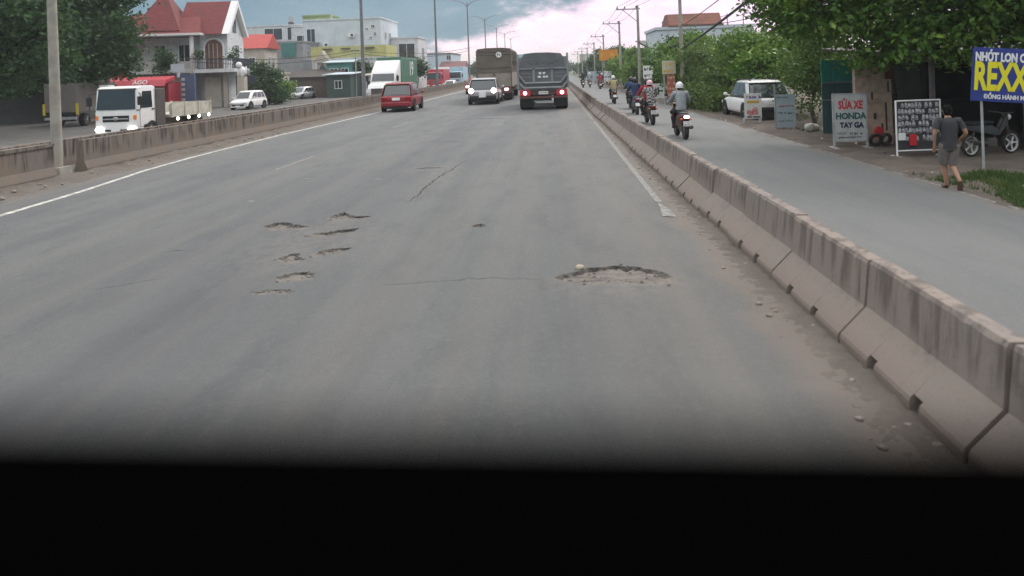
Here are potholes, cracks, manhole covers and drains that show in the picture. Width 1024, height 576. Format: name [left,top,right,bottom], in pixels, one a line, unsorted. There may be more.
pothole [275,271,317,283]
crack [410,161,464,201]
pothole [263,222,310,231]
pothole [304,227,359,237]
pothole [326,211,371,221]
pothole [274,253,306,264]
pothole [551,263,684,286]
pothole [310,248,351,258]
